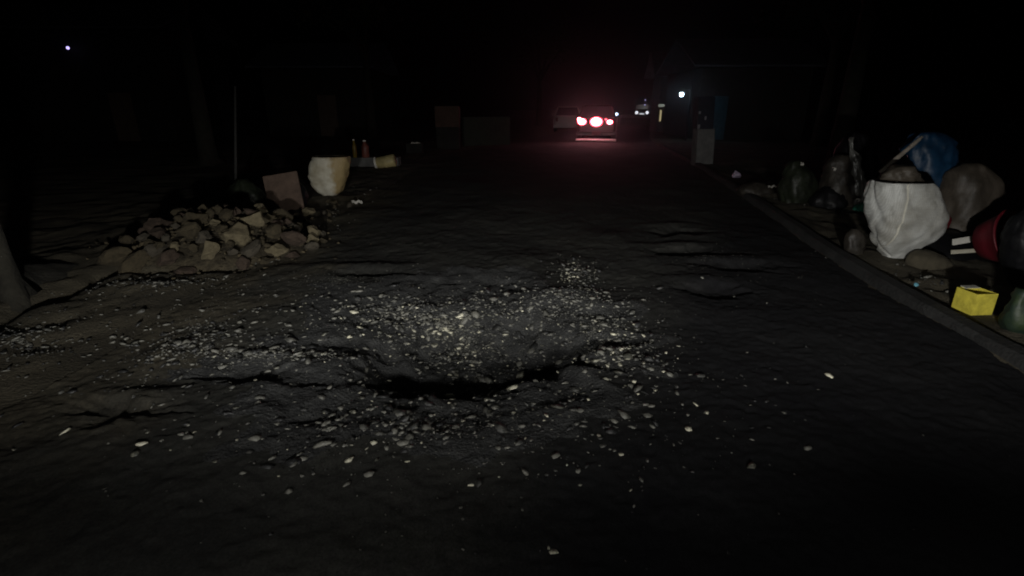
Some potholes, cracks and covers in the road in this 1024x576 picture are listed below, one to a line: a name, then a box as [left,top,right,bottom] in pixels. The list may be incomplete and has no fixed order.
pothole [201,265,680,467]
pothole [654,277,772,302]
pothole [640,242,747,257]
pothole [637,222,727,239]
pothole [677,257,814,275]
